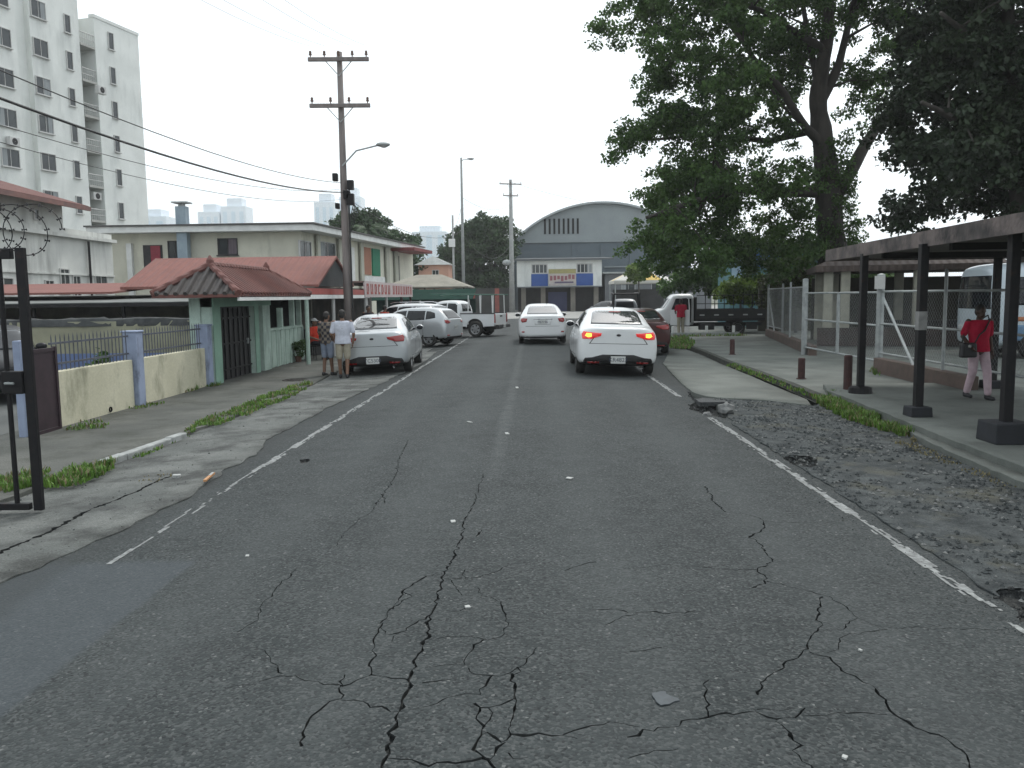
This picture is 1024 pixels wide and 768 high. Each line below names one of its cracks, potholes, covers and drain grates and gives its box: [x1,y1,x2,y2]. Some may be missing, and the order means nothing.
pothole [783,456,817,467]
crack [231,474,638,768]
crack [599,609,694,625]
crack [618,486,1002,768]
pothole [993,586,1024,622]
crack [0,476,170,554]
pothole [688,392,731,418]
crack [336,441,408,547]
